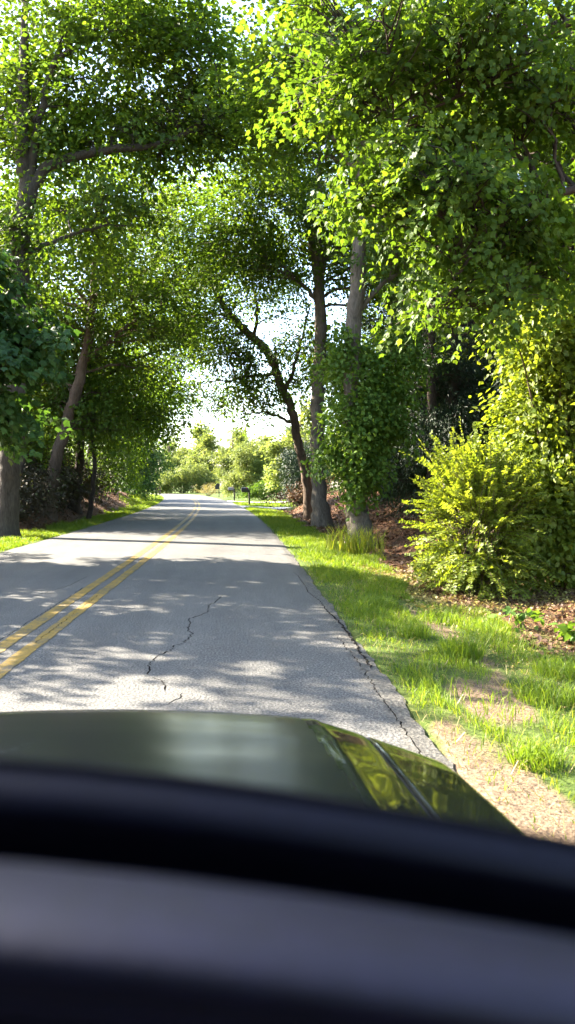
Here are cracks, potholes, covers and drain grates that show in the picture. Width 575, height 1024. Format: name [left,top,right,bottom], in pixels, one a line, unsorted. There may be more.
crack [147,597,220,704]
crack [293,572,372,668]
